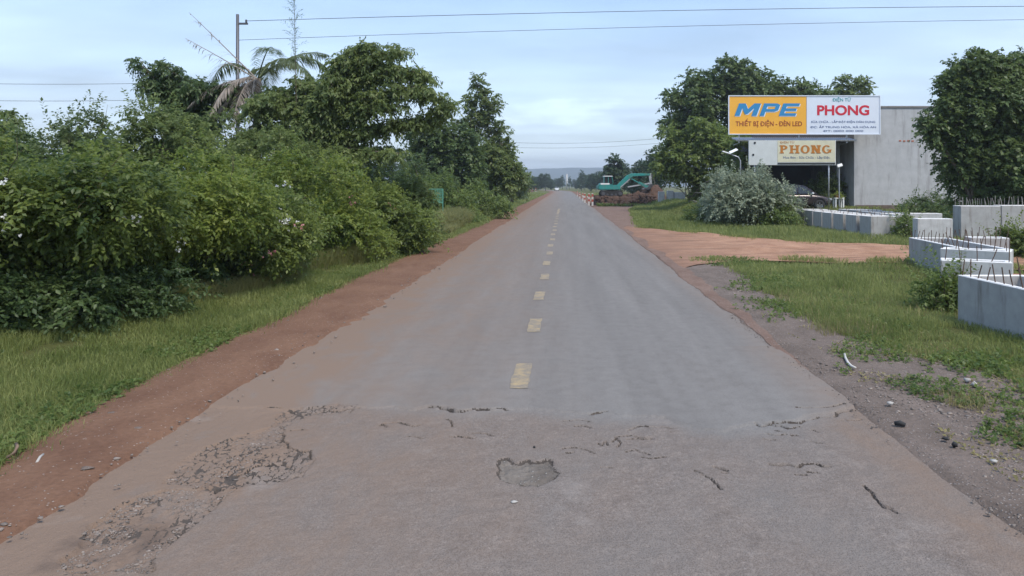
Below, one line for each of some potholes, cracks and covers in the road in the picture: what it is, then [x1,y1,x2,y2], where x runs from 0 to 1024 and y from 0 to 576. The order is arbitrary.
crack [496,412,667,487]
crack [756,403,857,444]
crack [862,485,898,514]
pothole [498,461,559,487]
crack [794,463,824,476]
crack [381,406,506,439]
